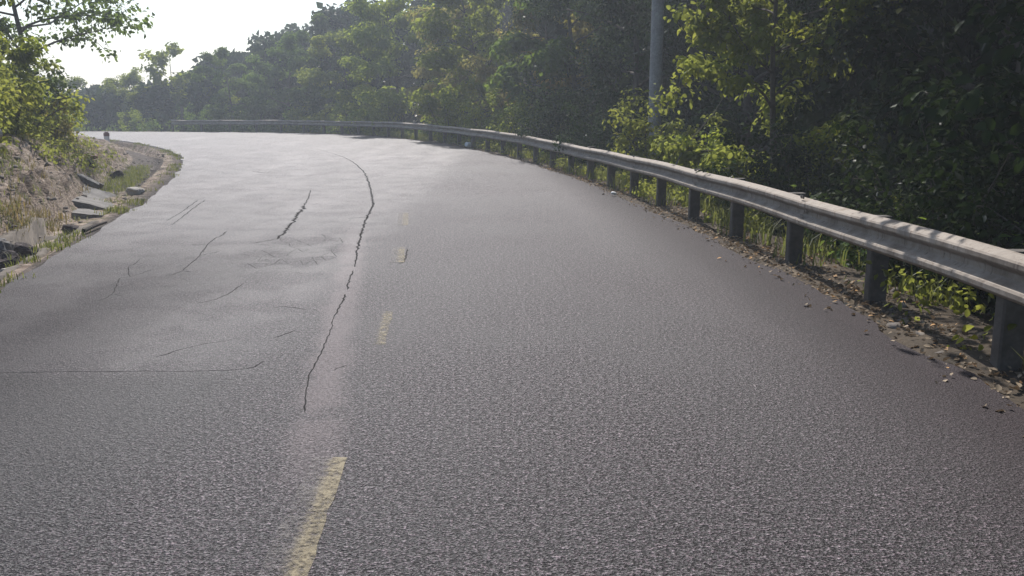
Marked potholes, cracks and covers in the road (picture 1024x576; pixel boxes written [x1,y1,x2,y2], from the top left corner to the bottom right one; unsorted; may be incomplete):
crack [98,259,151,301]
crack [167,200,227,275]
crack [244,149,375,412]
